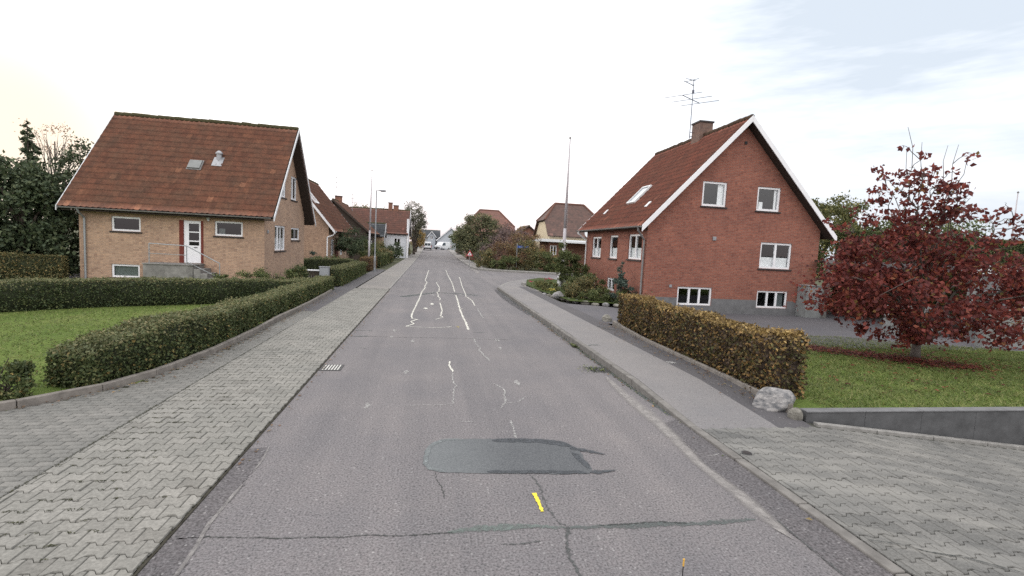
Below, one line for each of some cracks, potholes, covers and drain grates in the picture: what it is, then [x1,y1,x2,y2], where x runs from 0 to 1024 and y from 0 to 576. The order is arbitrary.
crack [530,475,756,576]
